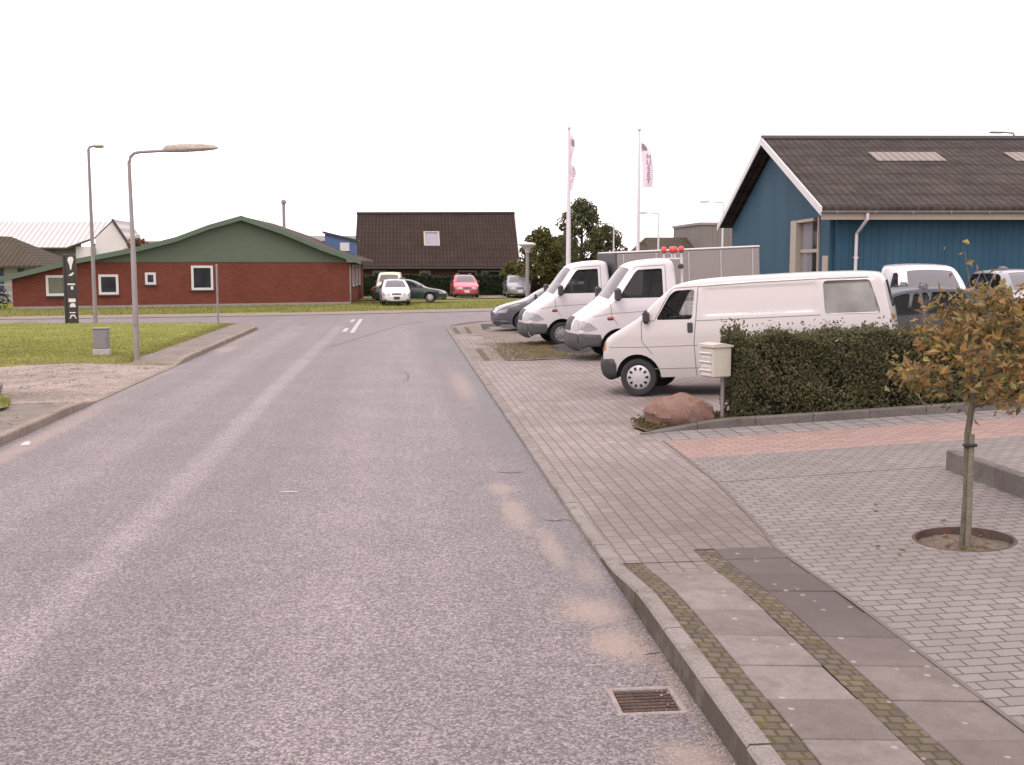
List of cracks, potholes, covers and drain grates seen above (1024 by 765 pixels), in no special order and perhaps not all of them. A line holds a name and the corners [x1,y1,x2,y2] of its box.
drain grate [605,686,691,716]
crack [331,321,424,347]
